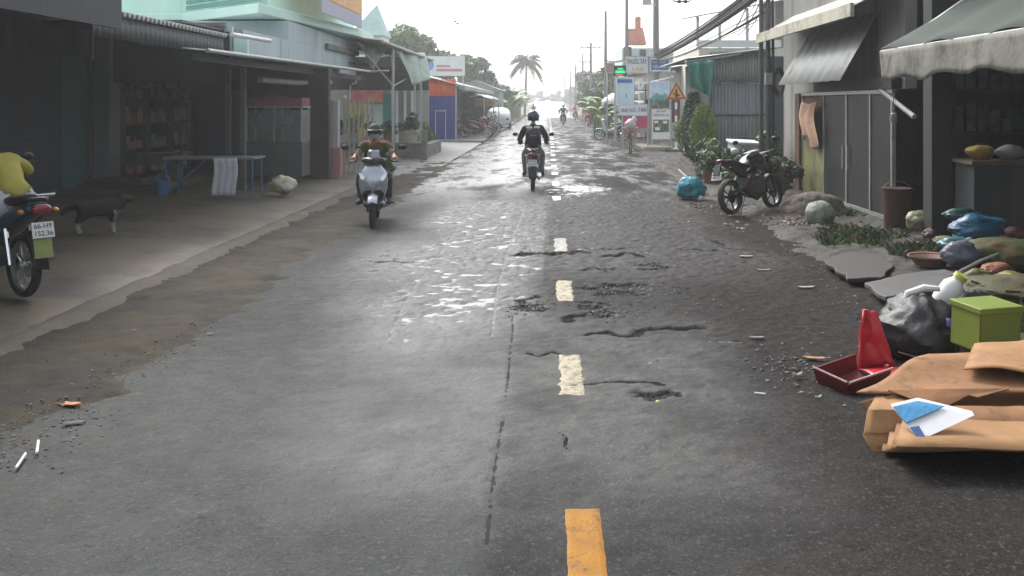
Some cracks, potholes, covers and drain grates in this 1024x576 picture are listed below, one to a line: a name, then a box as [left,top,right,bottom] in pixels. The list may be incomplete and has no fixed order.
pothole [631,390,683,402]
pothole [577,304,616,319]
pothole [511,302,550,312]
crack [560,301,742,343]
